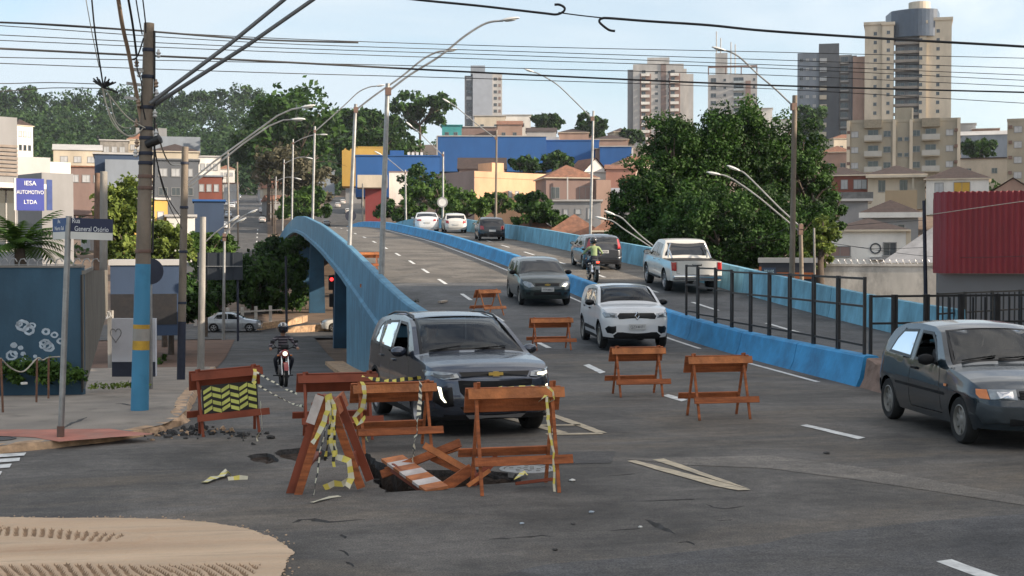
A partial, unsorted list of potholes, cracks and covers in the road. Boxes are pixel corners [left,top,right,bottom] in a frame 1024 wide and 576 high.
crack [638,499,742,521]
pothole [359,453,521,493]
pothole [247,453,279,464]
pothole [275,448,332,462]
crack [611,519,695,545]
manhole cover [499,465,553,478]
crack [293,518,365,567]
